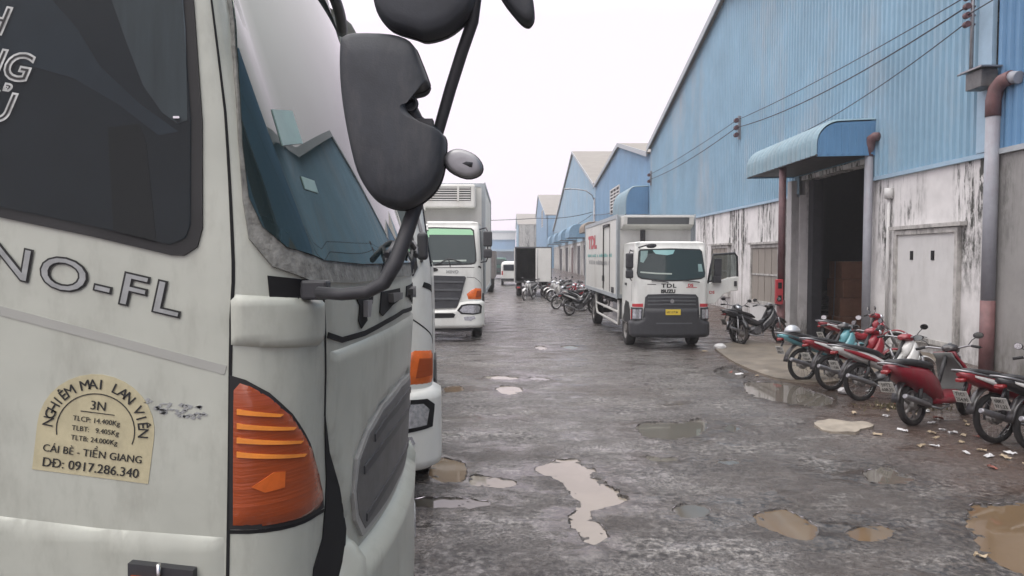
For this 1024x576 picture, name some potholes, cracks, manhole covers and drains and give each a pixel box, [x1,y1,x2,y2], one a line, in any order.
pothole [534,458,630,545]
pothole [414,496,491,509]
pothole [861,467,915,484]
pothole [742,381,835,406]
pothole [635,418,708,440]
pothole [672,503,711,518]
pothole [964,502,1024,576]
pothole [495,385,523,395]
pothole [468,474,517,488]
pothole [428,457,468,483]
pothole [753,507,819,540]
pothole [844,524,897,542]
